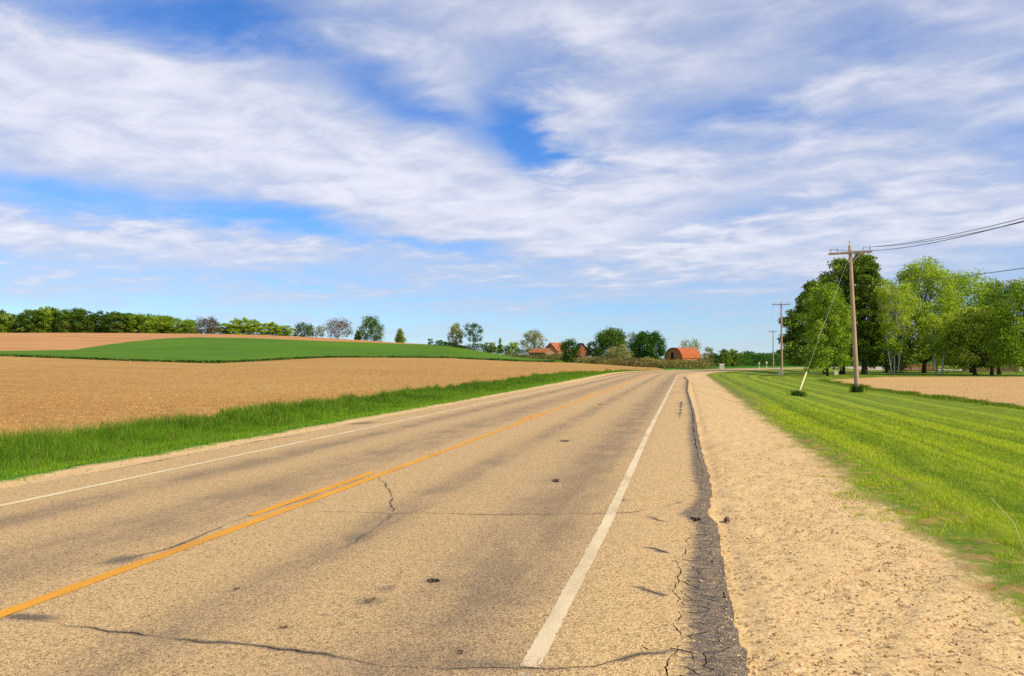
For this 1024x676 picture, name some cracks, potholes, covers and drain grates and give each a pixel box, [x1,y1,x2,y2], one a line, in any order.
crack [642,382,734,676]
crack [114,478,669,562]
crack [11,614,684,669]
